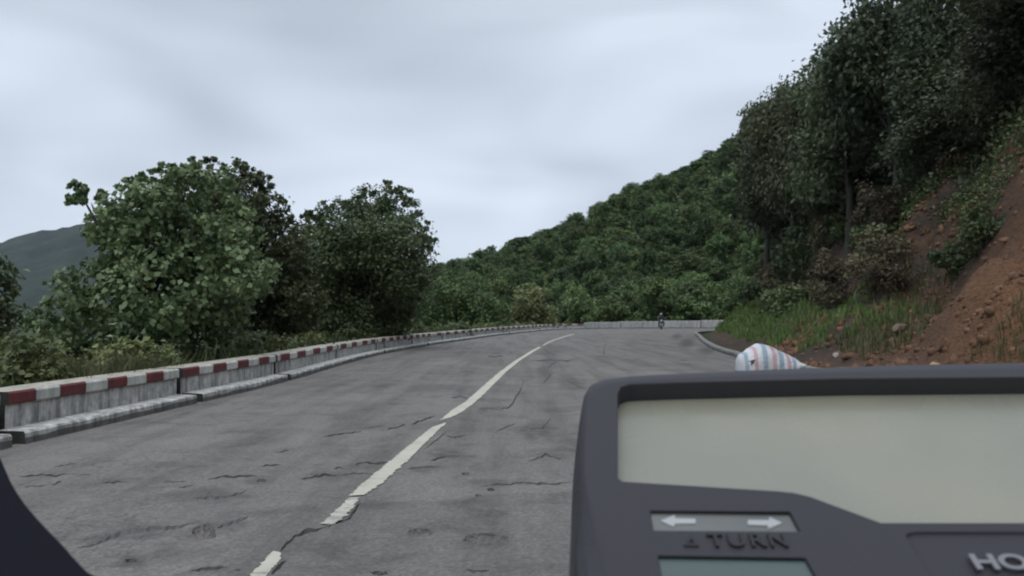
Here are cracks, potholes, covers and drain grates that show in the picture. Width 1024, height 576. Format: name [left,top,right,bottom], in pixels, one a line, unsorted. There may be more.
crack [323,403,465,469]
pothole [462,533,513,545]
pothole [192,524,216,540]
crack [271,503,360,575]
crack [24,463,121,487]
crack [299,461,387,479]
crack [453,381,548,431]
crack [165,450,290,528]
